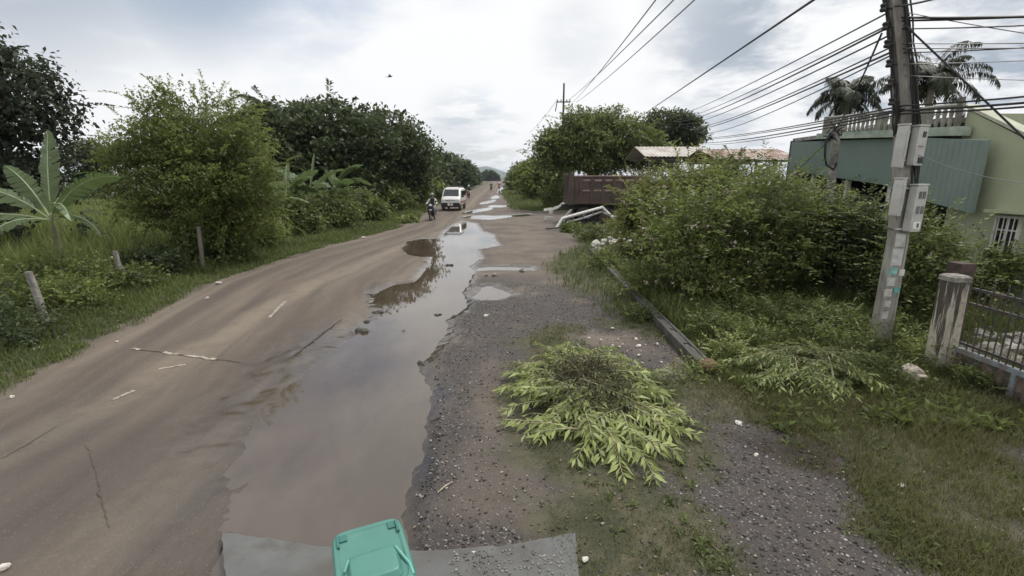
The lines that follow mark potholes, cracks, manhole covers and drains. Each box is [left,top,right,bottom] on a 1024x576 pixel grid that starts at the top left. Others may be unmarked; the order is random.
pothole [404,237,441,258]
crack [132,348,242,363]
crack [293,319,342,356]
pothole [462,282,527,303]
crack [87,448,107,518]
pothole [367,277,418,314]
